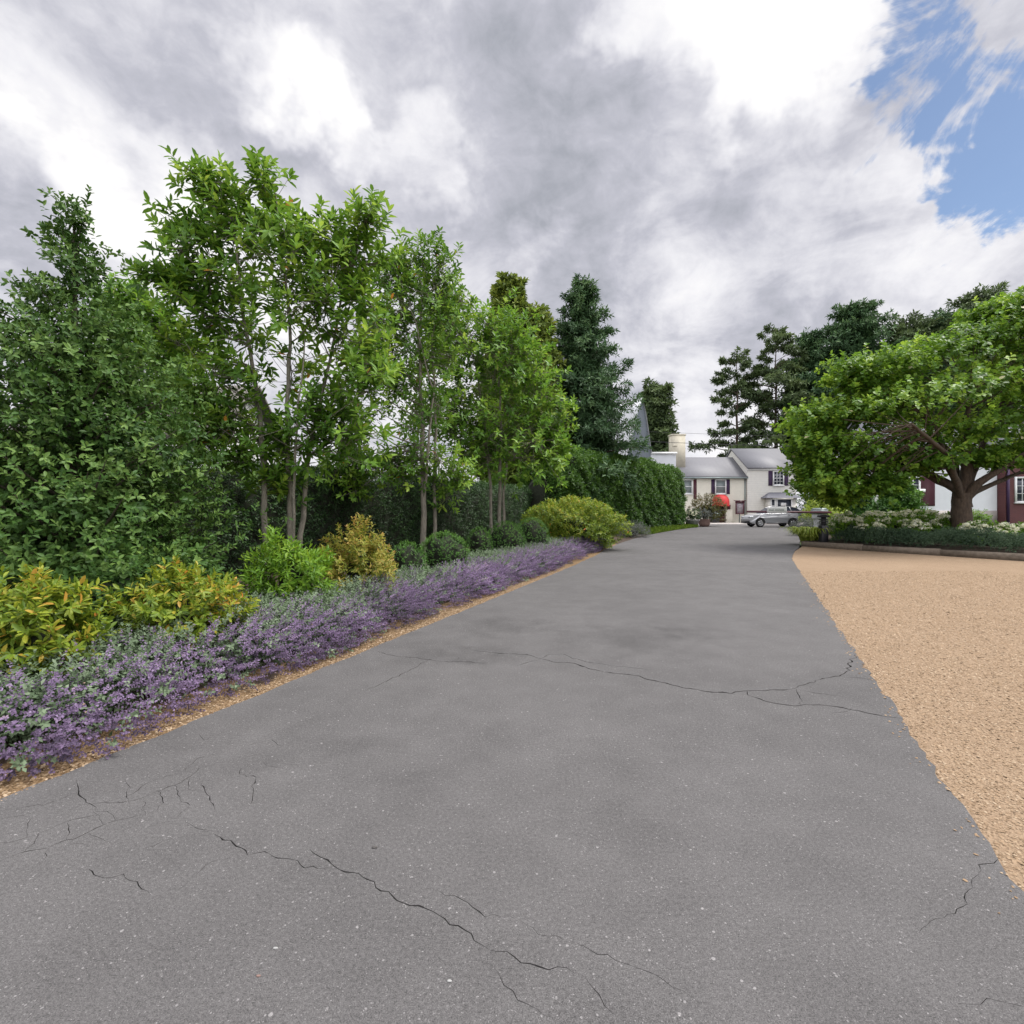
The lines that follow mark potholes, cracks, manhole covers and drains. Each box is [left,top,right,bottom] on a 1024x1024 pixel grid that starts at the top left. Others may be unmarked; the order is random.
crack [917,860,997,934]
crack [481,651,896,718]
crack [179,823,693,1017]
crack [1,738,222,871]
